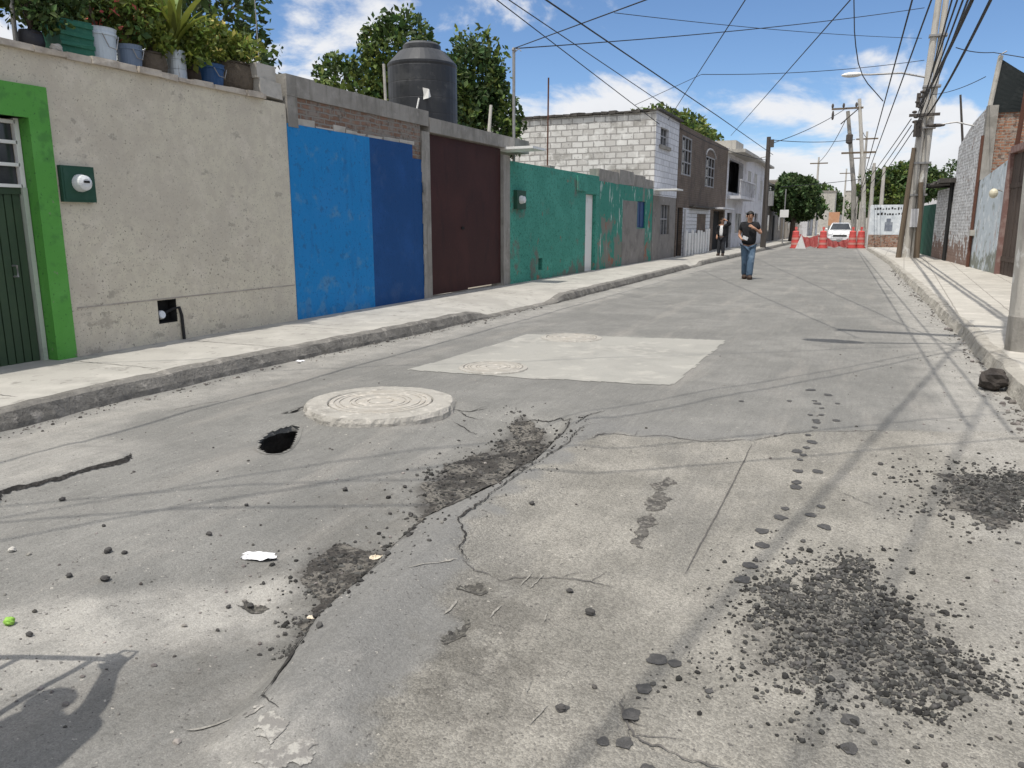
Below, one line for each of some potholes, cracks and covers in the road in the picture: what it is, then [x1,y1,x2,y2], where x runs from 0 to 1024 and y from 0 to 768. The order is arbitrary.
crack [427,410,889,587]
manhole cover [541,333,602,342]
manhole cover [459,361,528,375]
manhole cover [303,386,457,428]
crack [619,697,727,768]
pothole [254,423,303,455]
crack [0,453,133,500]
